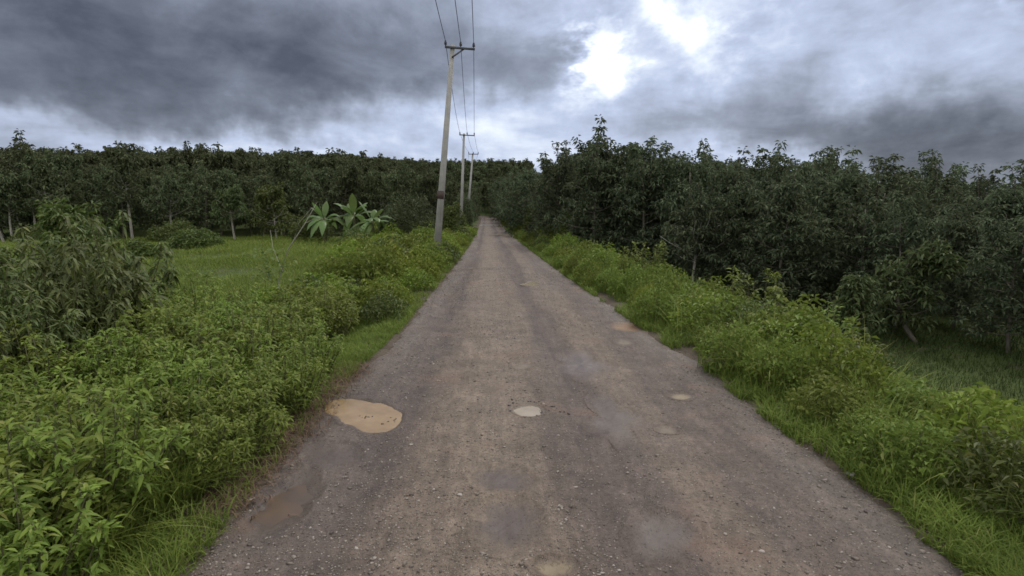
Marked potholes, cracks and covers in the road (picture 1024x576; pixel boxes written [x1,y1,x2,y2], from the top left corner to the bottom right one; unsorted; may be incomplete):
pothole [605,319,648,333]
pothole [508,402,549,418]
pothole [652,424,682,435]
pothole [662,389,698,402]
pothole [523,551,585,576]
pothole [611,336,638,348]
pothole [322,395,409,435]
pothole [236,465,330,543]
